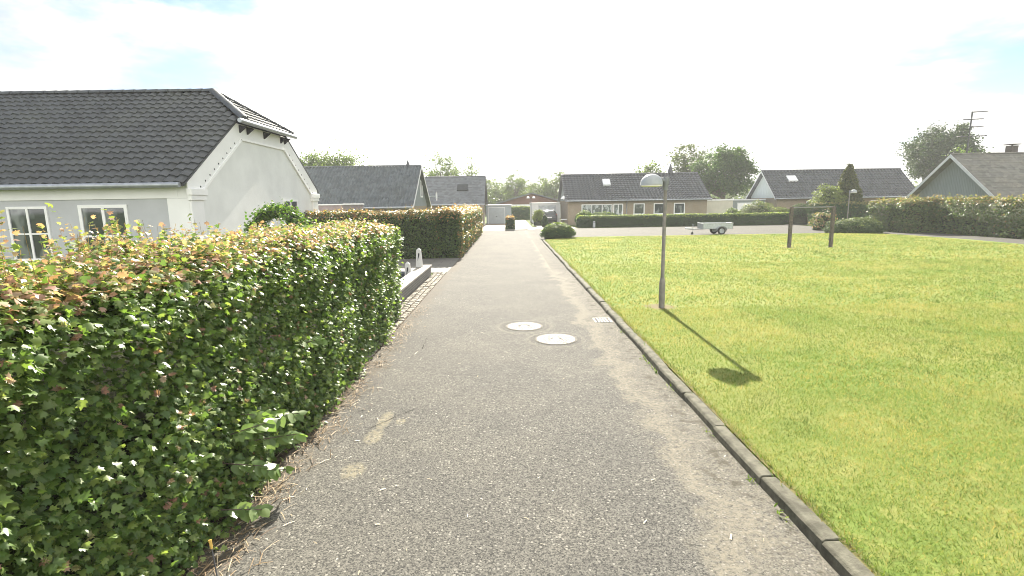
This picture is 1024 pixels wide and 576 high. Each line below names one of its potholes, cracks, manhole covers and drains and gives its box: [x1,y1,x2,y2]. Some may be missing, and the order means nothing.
manhole cover [535,333,578,345]
manhole cover [506,322,543,331]
